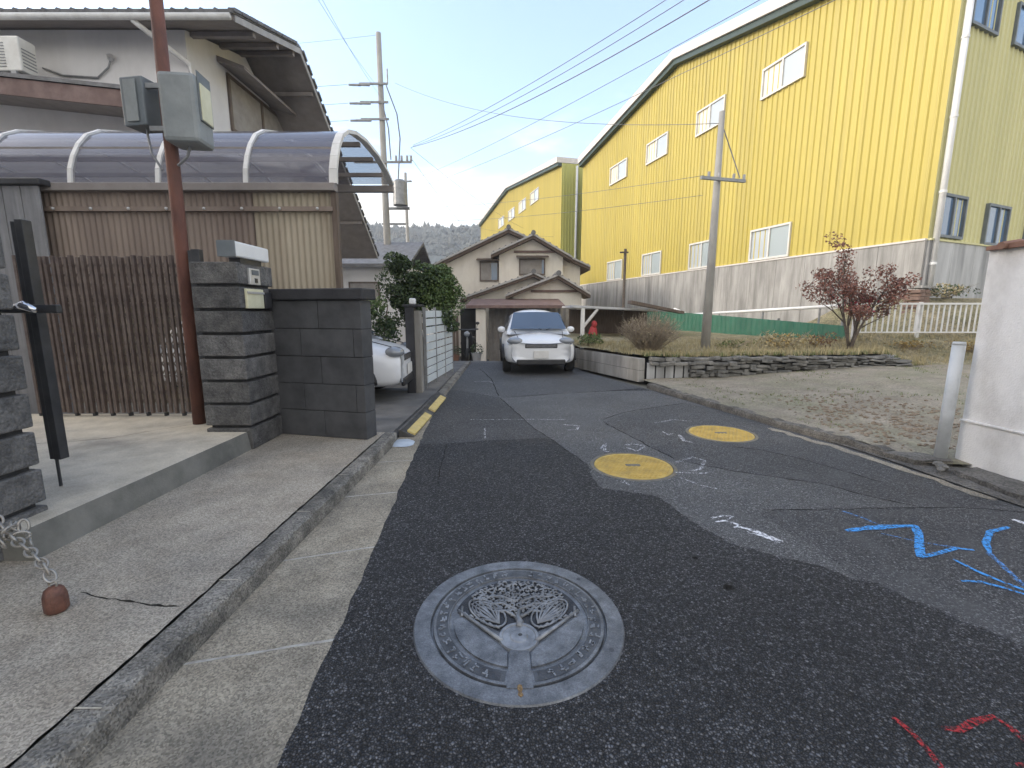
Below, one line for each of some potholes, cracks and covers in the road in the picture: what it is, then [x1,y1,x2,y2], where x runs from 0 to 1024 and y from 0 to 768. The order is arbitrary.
manhole cover [685,425,759,443]
crack [82,592,179,607]
manhole cover [590,452,678,482]
manhole cover [413,561,625,708]
